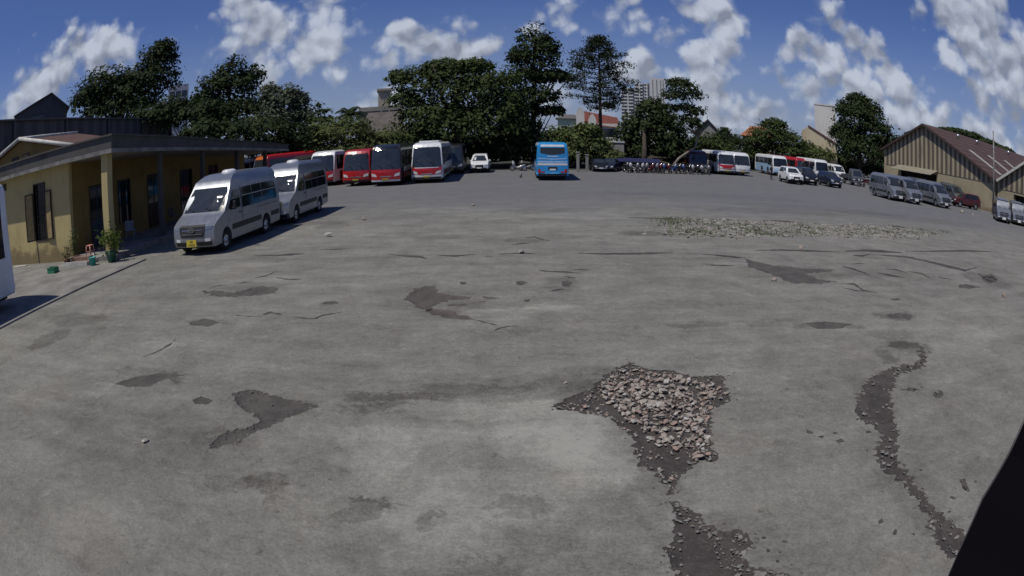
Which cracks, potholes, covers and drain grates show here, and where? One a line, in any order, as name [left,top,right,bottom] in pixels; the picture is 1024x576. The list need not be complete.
pothole [205,389,320,453]
pothole [116,373,187,387]
crack [843,263,948,293]
crack [213,271,300,287]
crack [236,311,341,319]
pothole [660,498,803,576]
pothole [745,259,836,284]
pothole [807,347,977,559]
pothole [550,359,738,496]
pothole [202,286,279,297]
pothole [403,285,486,320]
